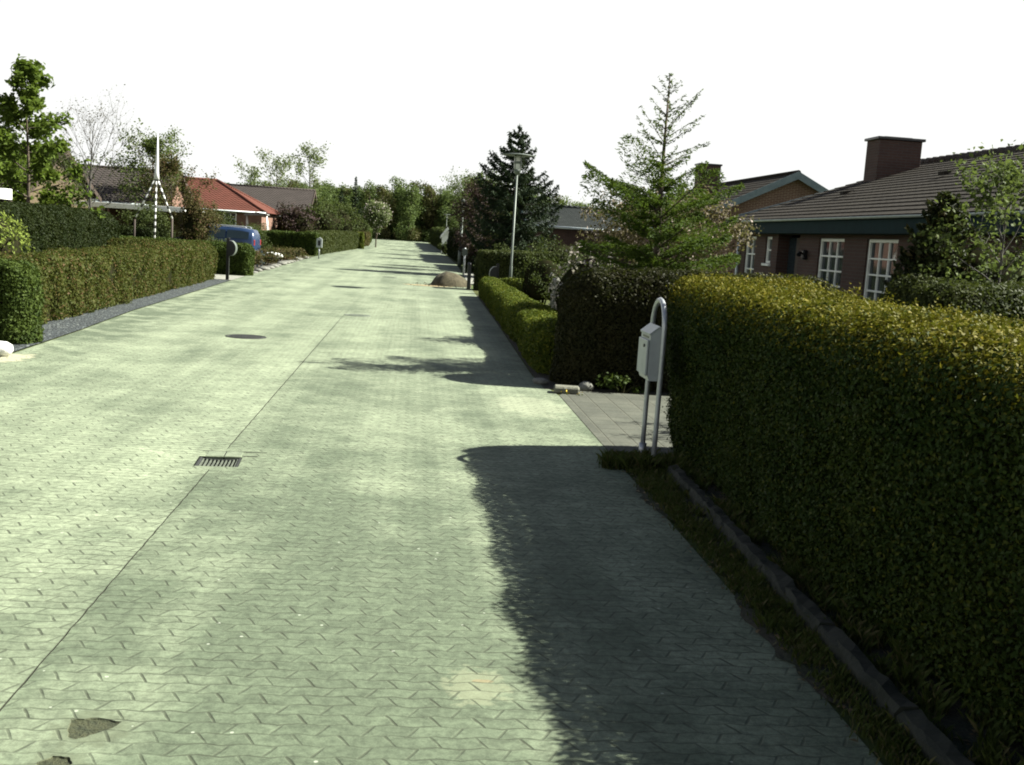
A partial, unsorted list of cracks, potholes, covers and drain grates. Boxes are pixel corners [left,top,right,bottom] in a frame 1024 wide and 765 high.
pothole [37,756,72,765]
pothole [67,718,121,739]
drain grate [193,451,263,467]
